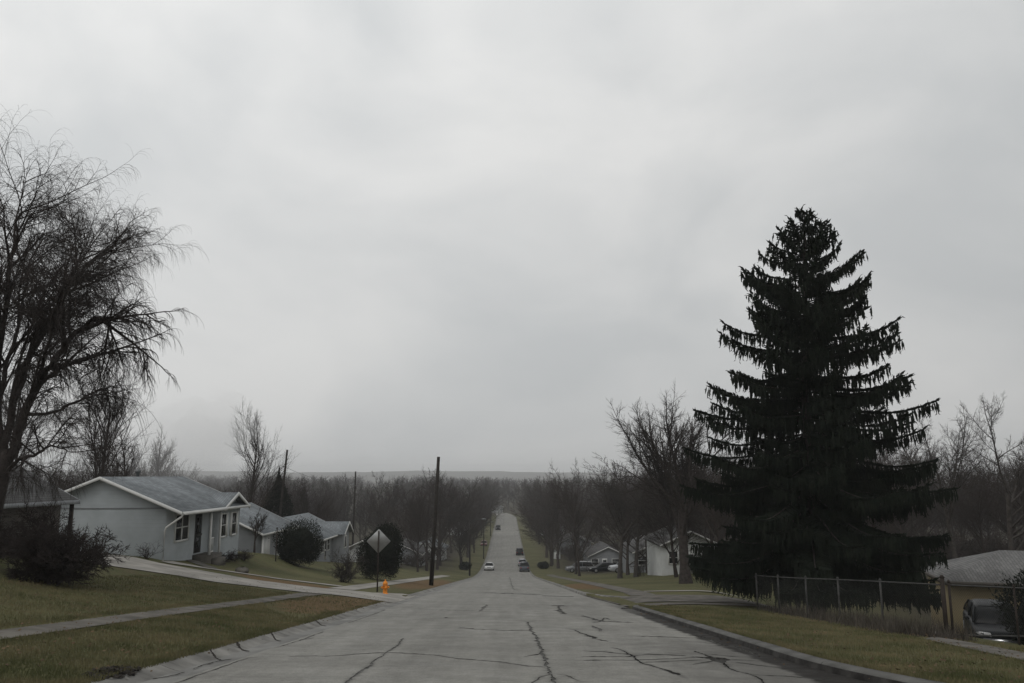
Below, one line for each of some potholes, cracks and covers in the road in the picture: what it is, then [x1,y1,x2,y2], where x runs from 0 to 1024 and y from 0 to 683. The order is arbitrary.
crack [335,580,836,683]
